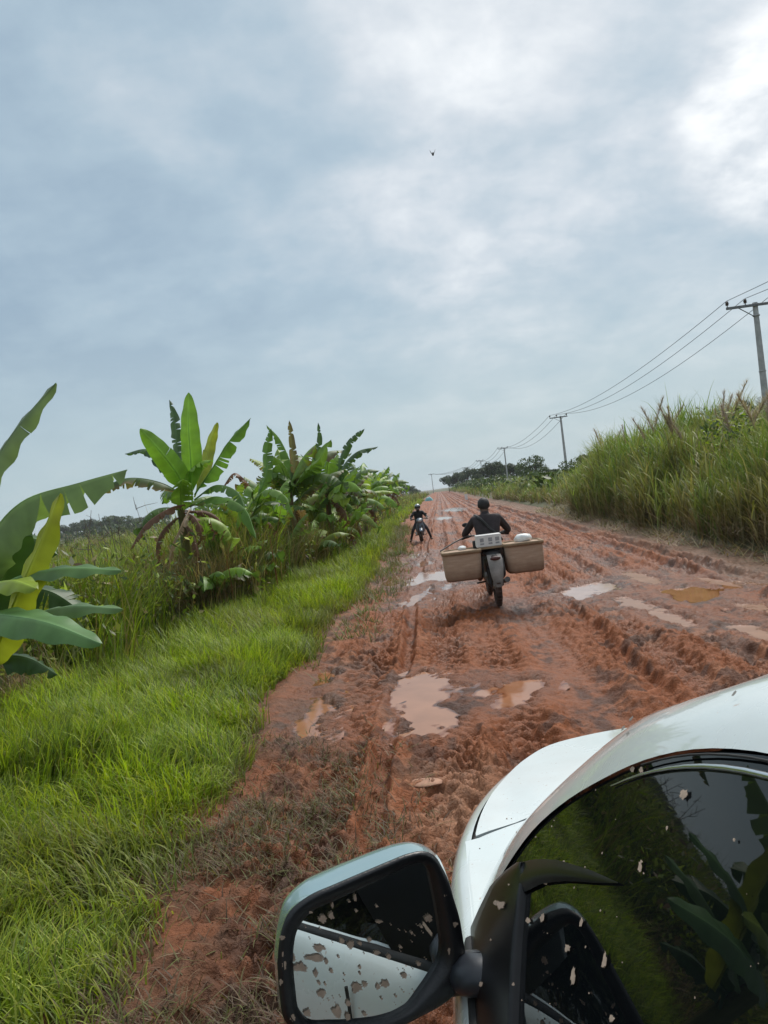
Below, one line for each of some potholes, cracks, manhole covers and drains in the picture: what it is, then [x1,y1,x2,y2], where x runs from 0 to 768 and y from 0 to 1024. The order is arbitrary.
pothole [550,578,623,600]
pothole [607,591,727,628]
pothole [402,568,447,588]
pothole [660,582,741,603]
pothole [273,684,354,743]
pothole [377,667,492,745]
pothole [473,673,570,717]
